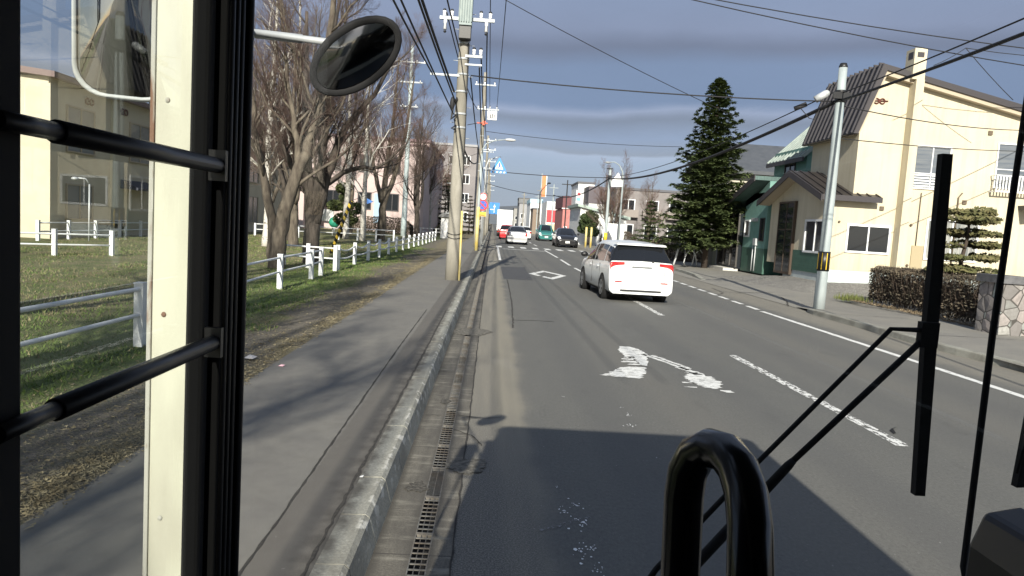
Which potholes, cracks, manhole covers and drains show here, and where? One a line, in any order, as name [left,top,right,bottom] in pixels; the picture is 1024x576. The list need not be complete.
drain grate [416,496,440,534]
crack [507,279,554,328]
drain grate [425,467,446,497]
drain grate [405,533,433,576]
drain grate [432,444,450,468]
drain grate [443,409,457,425]
drain grate [438,425,454,445]
